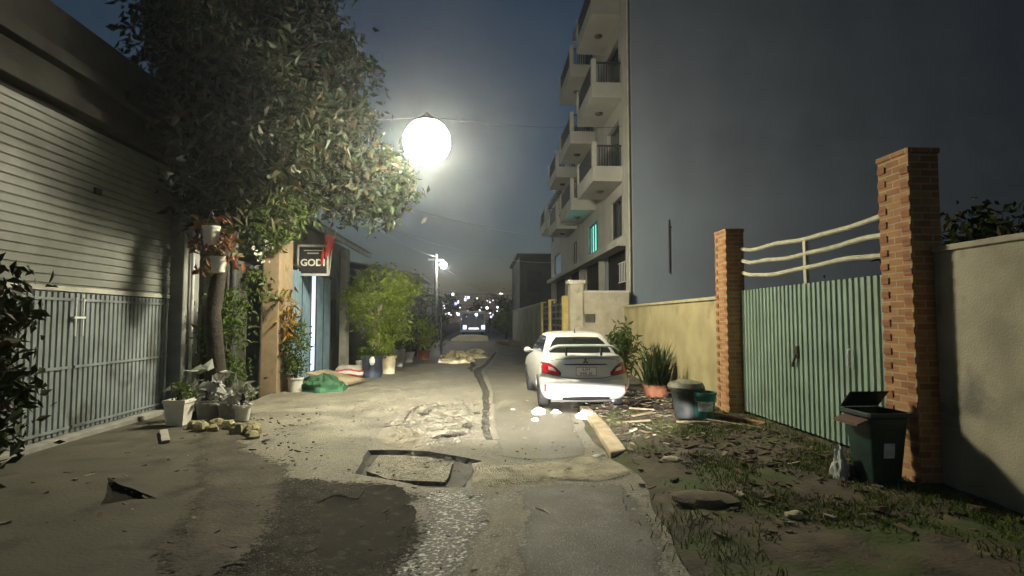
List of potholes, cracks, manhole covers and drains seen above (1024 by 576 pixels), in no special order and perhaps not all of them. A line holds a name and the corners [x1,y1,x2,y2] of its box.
pothole [433,430,468,439]
crack [376,352,498,440]
pothole [100,478,157,505]
